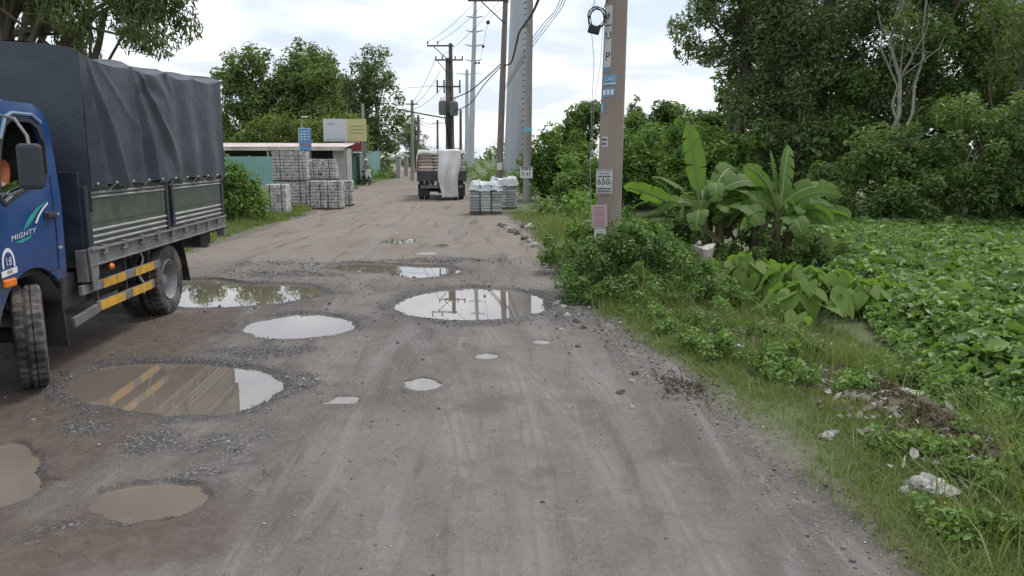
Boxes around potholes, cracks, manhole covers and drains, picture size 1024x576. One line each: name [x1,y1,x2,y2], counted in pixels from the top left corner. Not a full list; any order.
pothole [211,307,381,346]
pothole [470,351,504,361]
pothole [0,431,91,521]
pothole [365,283,578,326]
pothole [0,353,346,446]
pothole [53,470,238,539]
pothole [315,394,367,408]
pothole [174,276,350,313]
pothole [315,260,475,282]
pothole [396,375,453,394]
